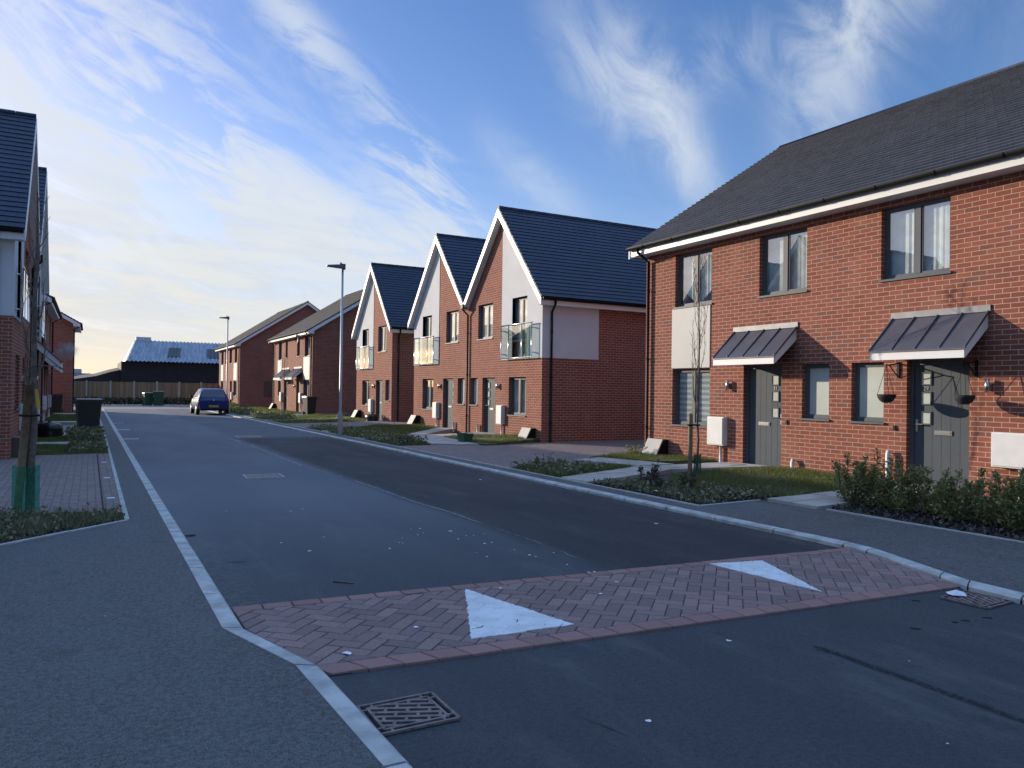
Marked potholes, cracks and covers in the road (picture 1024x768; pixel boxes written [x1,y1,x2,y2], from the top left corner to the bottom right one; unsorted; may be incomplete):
drain grate [356,692,461,736]
drain grate [939,590,1013,609]
